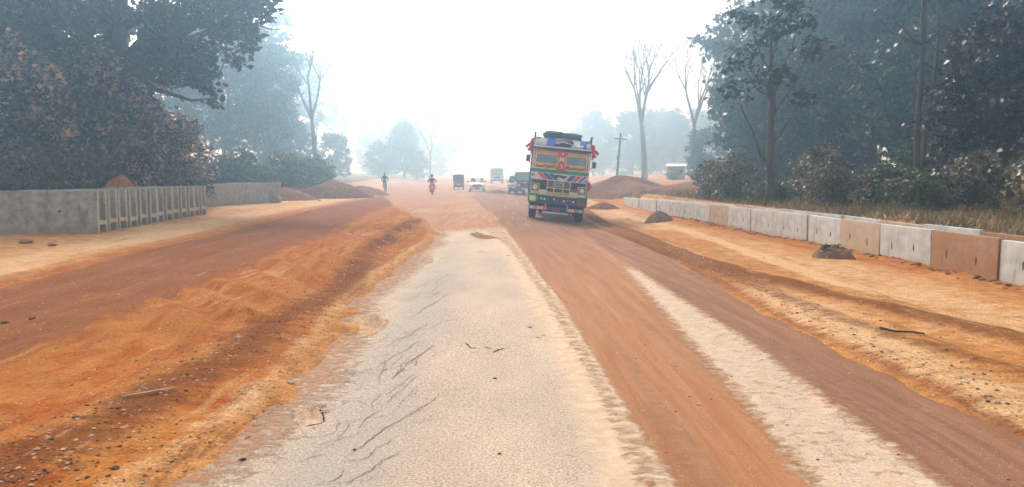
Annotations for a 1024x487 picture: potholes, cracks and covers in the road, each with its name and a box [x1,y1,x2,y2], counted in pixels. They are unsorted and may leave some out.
crack [289,257,471,484]
pothole [292,405,325,426]
